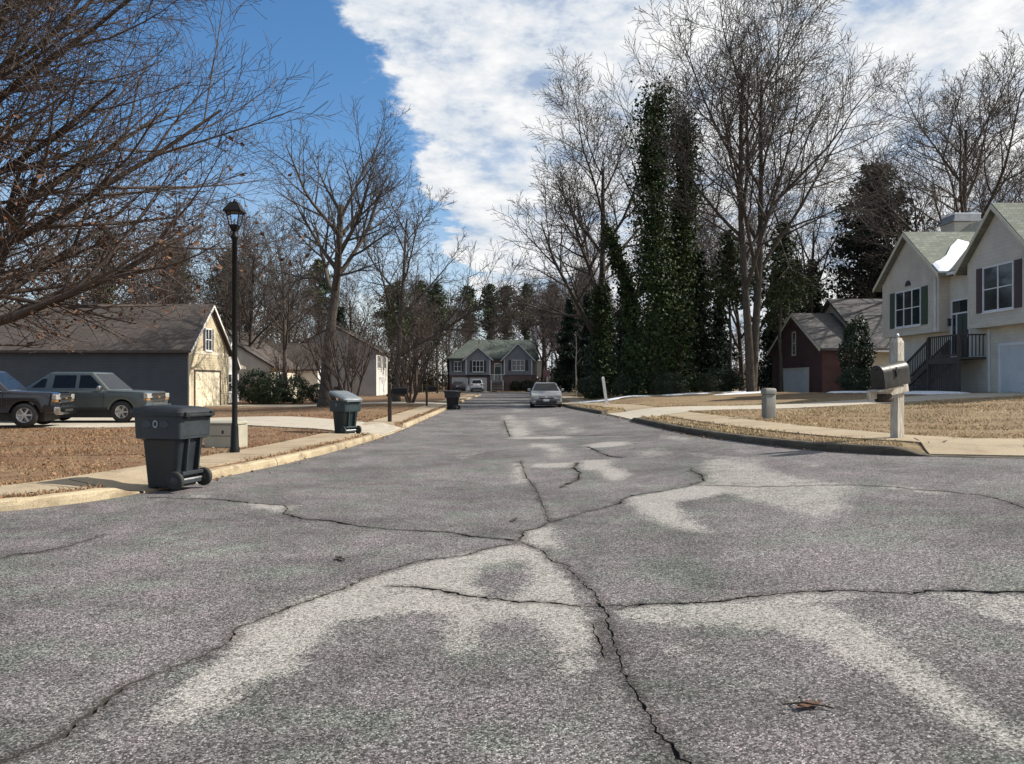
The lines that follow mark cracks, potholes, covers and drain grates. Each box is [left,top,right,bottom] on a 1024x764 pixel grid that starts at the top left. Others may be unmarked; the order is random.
crack [531,435,622,488]
crack [0,462,1024,764]
